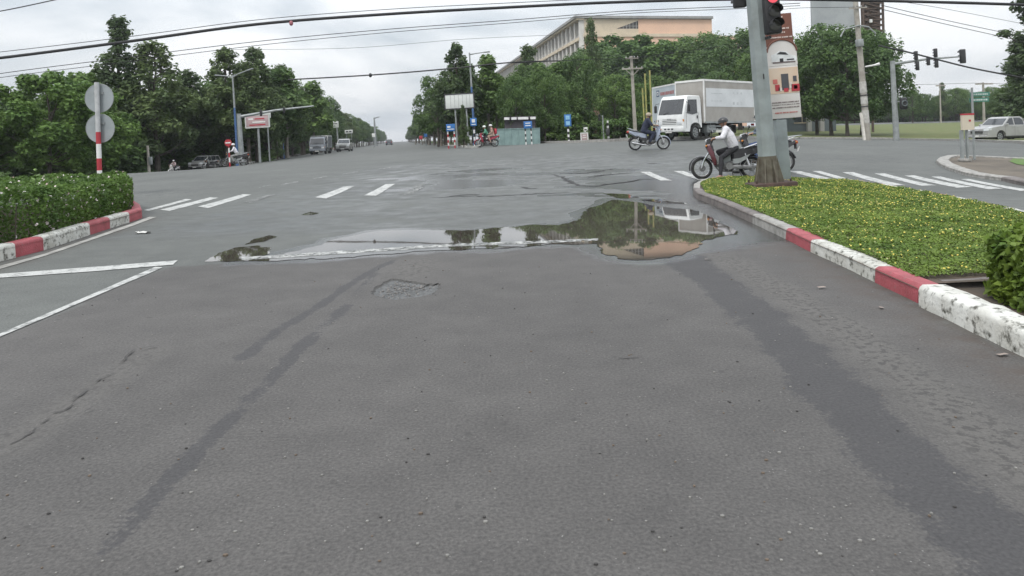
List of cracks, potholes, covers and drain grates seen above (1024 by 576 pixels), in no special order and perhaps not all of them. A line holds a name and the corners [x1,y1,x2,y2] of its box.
crack [10,345,157,444]
pothole [371,278,440,300]
